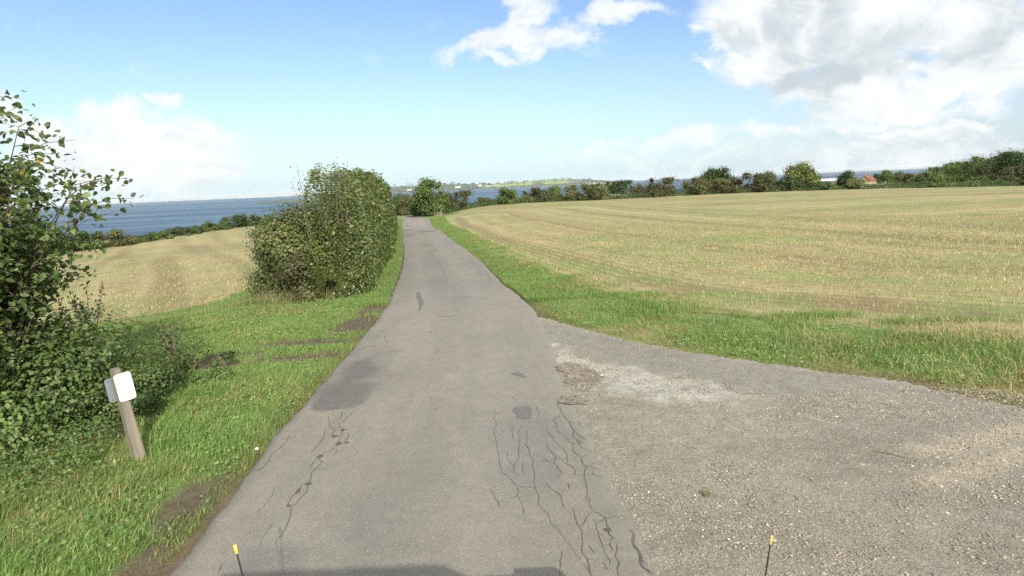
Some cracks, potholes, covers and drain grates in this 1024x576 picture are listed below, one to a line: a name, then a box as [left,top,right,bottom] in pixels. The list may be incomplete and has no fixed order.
pothole [556,362,605,392]
crack [490,411,554,526]
pothole [557,392,588,404]
crack [257,411,355,548]
crack [545,406,652,576]
